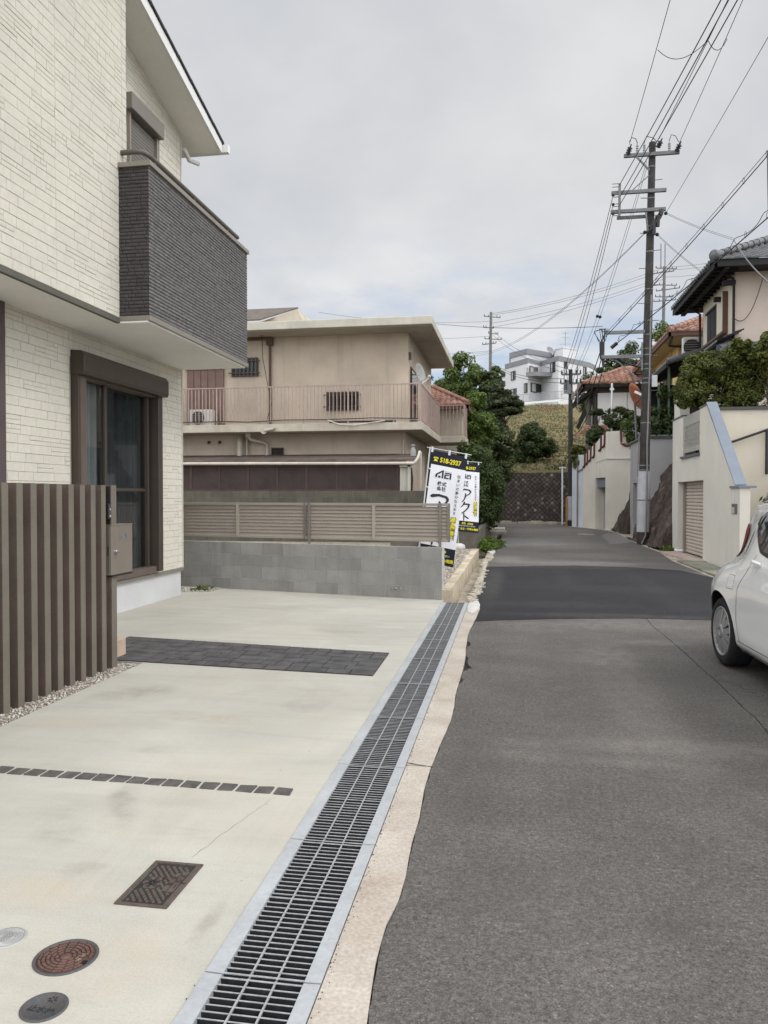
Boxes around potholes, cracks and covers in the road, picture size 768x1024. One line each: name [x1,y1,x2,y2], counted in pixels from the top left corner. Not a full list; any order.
drain grate [429,612,465,625]
drain grate [339,716,424,768]
drain grate [172,972,320,1024]
drain grate [370,682,437,719]
drain grate [291,764,405,848]
drain grate [419,624,460,640]
manhole cover [0,927,27,949]
manhole cover [32,939,99,977]
drain grate [407,639,454,659]
drain grate [436,602,468,613]
manhole cover [114,860,203,909]
manhole cover [19,992,69,1023]
